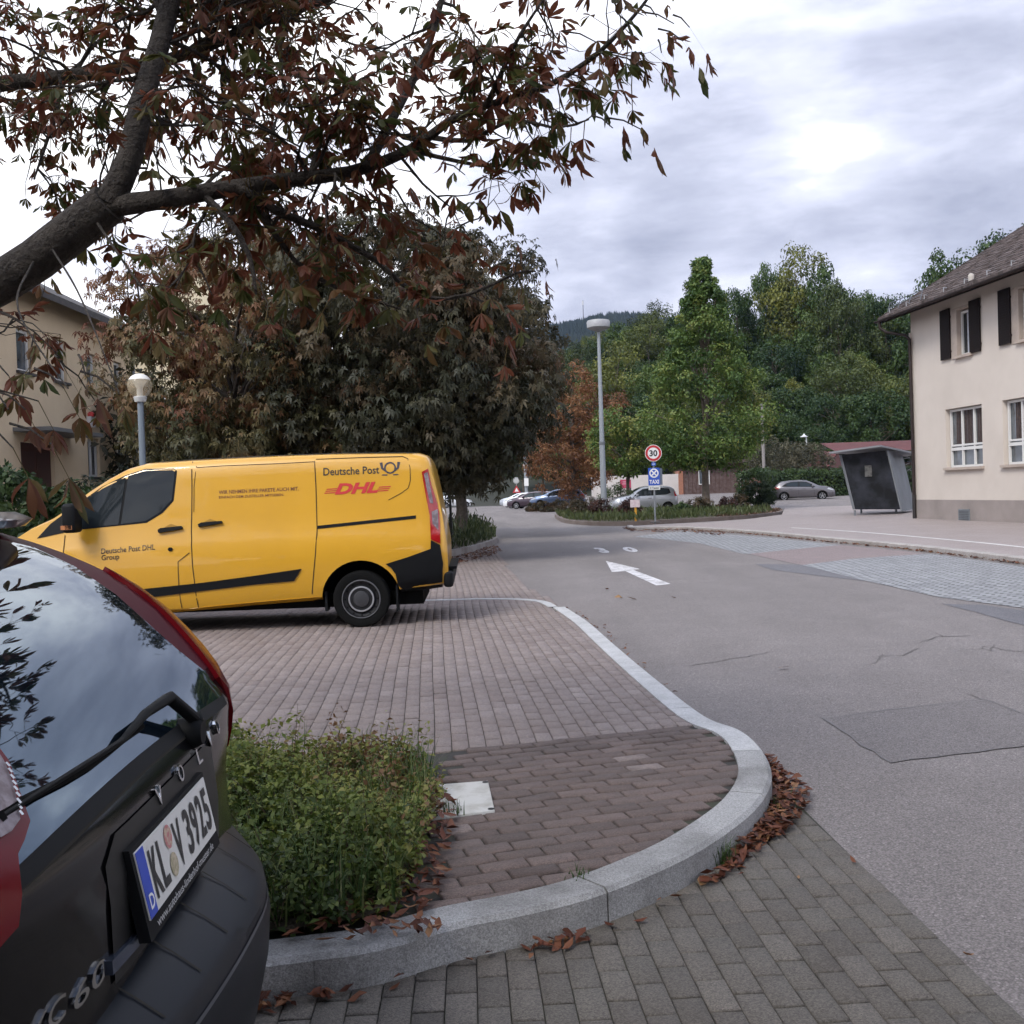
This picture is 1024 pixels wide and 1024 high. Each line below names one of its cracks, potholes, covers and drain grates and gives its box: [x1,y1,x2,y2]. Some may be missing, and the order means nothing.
crack [859,632,1023,666]
manhole cover [432,781,495,821]
